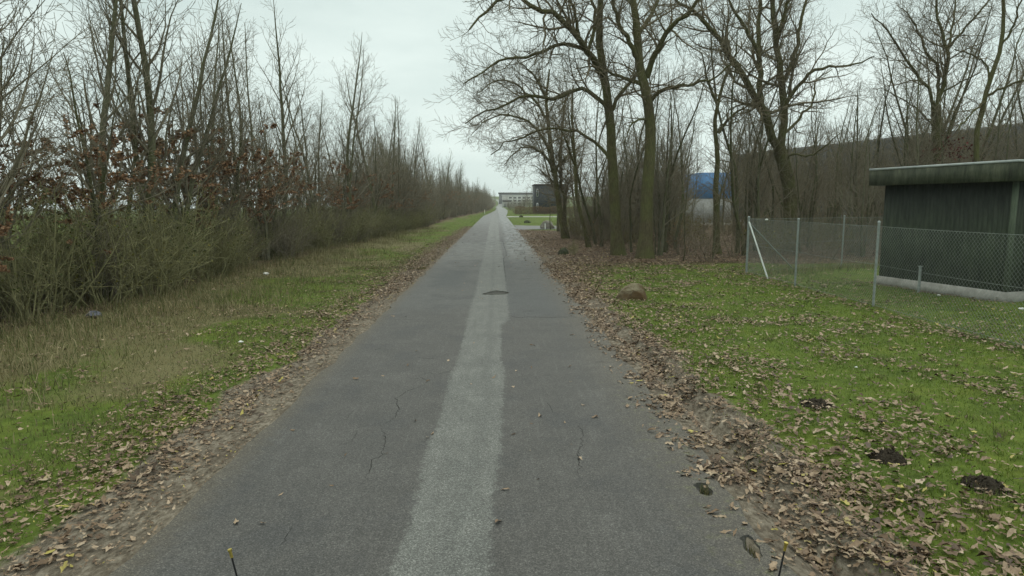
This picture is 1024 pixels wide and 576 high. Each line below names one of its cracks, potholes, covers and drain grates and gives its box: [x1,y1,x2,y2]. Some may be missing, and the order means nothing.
crack [343,357,445,483]
pothole [693,483,713,496]
